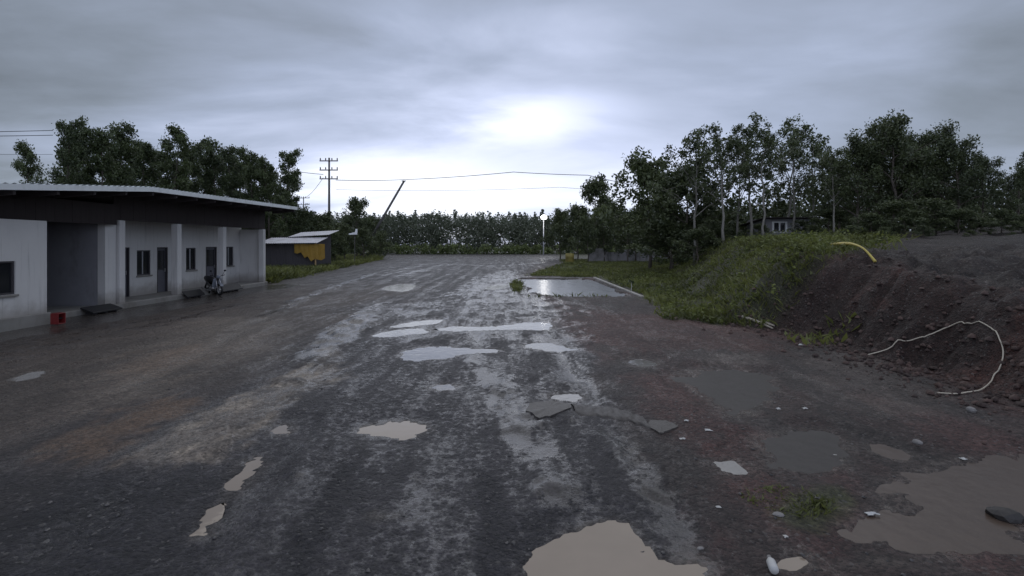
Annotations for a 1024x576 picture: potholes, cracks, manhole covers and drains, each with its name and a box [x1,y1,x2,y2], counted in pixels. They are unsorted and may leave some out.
pothole [380,283,421,292]
pothole [206,449,286,505]
pothole [518,339,587,353]
pothole [0,366,67,382]
pothole [345,415,446,443]
pothole [429,319,559,332]
pothole [391,344,508,362]
pothole [171,493,249,551]
pothole [498,510,735,576]
pothole [542,387,599,404]
pothole [364,327,439,338]
